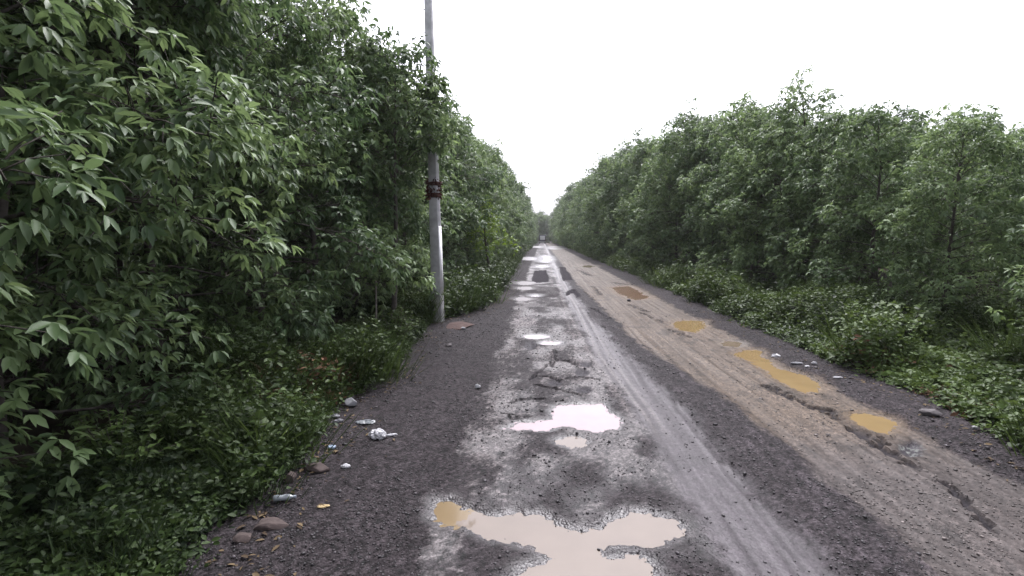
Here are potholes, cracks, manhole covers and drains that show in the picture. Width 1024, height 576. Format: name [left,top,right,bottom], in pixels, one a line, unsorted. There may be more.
pothole [669,319,708,333]
pothole [499,401,626,435]
pothole [552,434,592,449]
pothole [427,495,691,576]
crack [501,349,601,420]
pothole [843,410,901,435]
pothole [731,348,824,394]
pothole [522,340,539,350]
pothole [608,286,652,300]
pothole [530,270,550,283]
